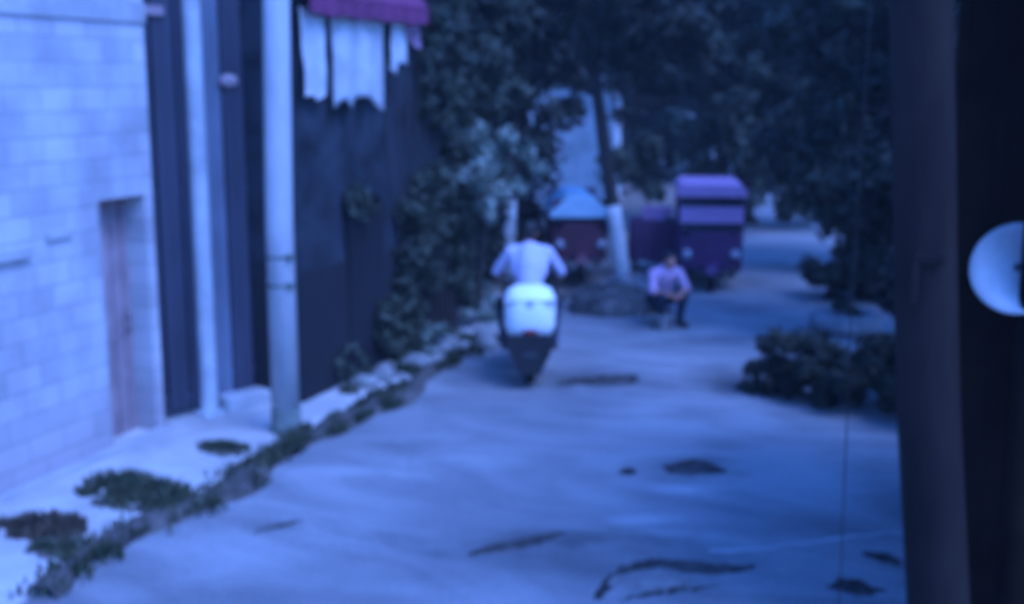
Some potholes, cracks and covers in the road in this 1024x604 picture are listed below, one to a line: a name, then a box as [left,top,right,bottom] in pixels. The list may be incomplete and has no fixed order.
pothole [824,578,887,597]
pothole [550,374,640,387]
pothole [592,558,757,600]
pothole [661,459,728,476]
pothole [618,468,637,476]
pothole [861,551,905,568]
